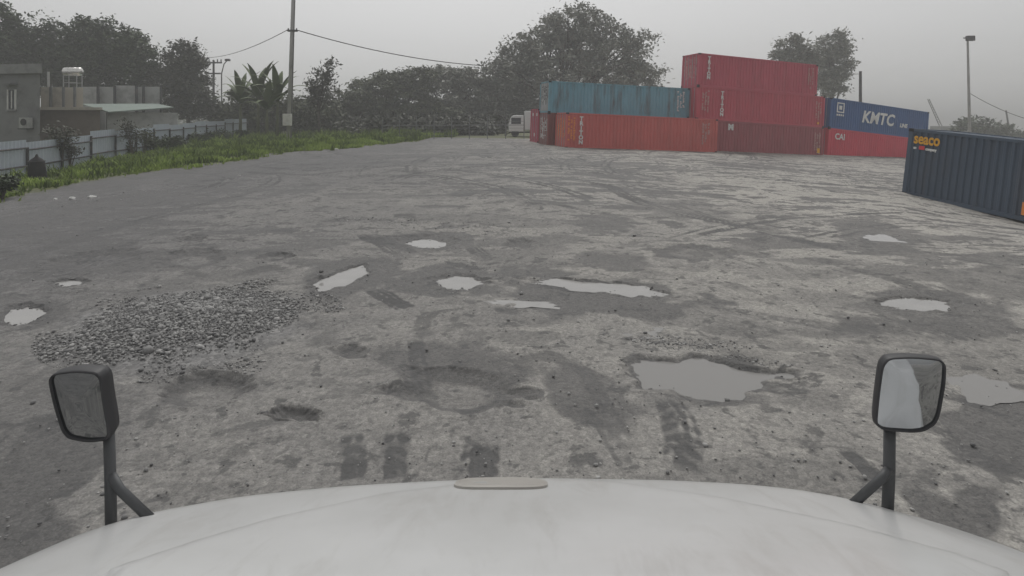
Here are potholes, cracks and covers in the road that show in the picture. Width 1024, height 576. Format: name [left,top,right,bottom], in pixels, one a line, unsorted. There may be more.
pothole [513,276,696,300]
pothole [262,403,327,423]
pothole [859,293,969,316]
pothole [144,366,275,412]
pothole [594,349,820,413]
pothole [287,261,380,296]
pothole [420,271,499,293]
pothole [0,300,56,331]
pothole [44,277,98,289]
pothole [385,232,468,252]
